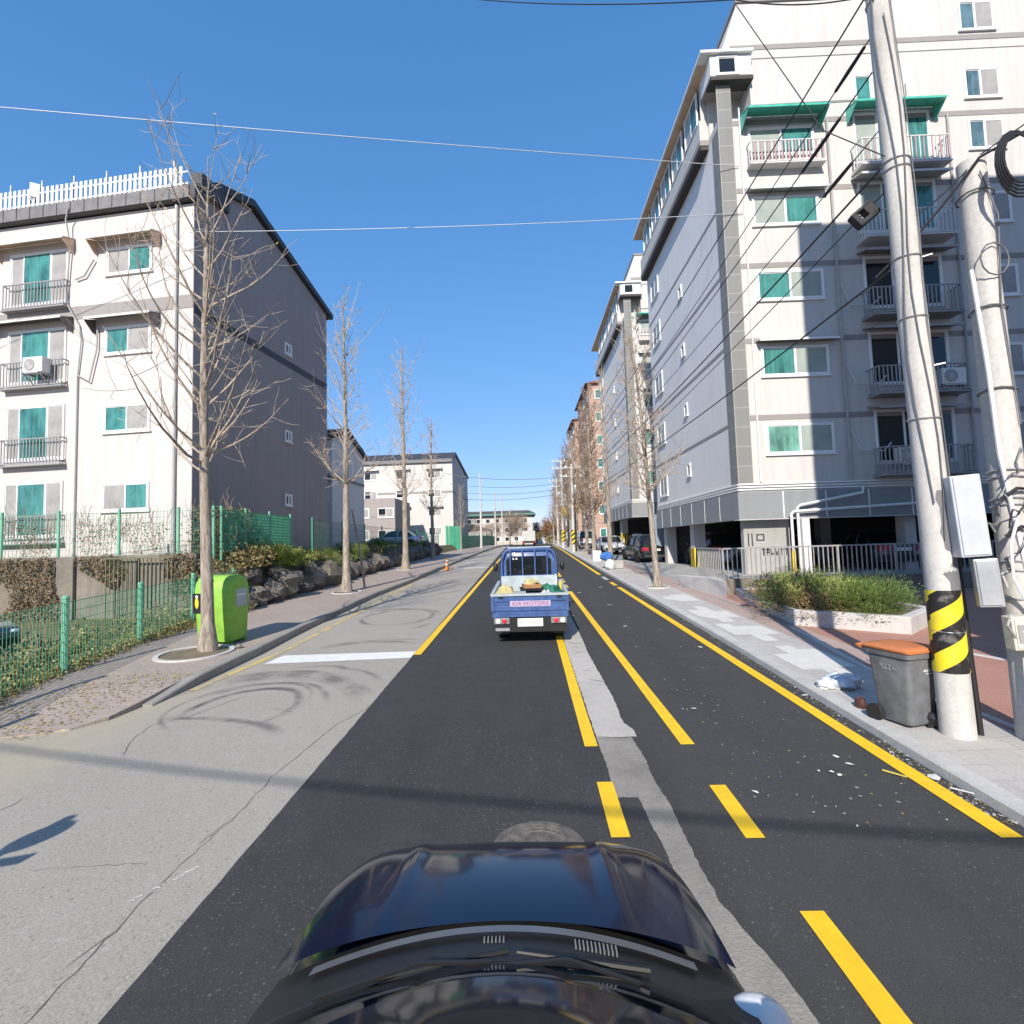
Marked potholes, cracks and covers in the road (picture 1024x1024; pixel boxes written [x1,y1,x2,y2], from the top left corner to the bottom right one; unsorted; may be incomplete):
crack [25,705,370,1024]
manhole cover [494,821,585,842]
